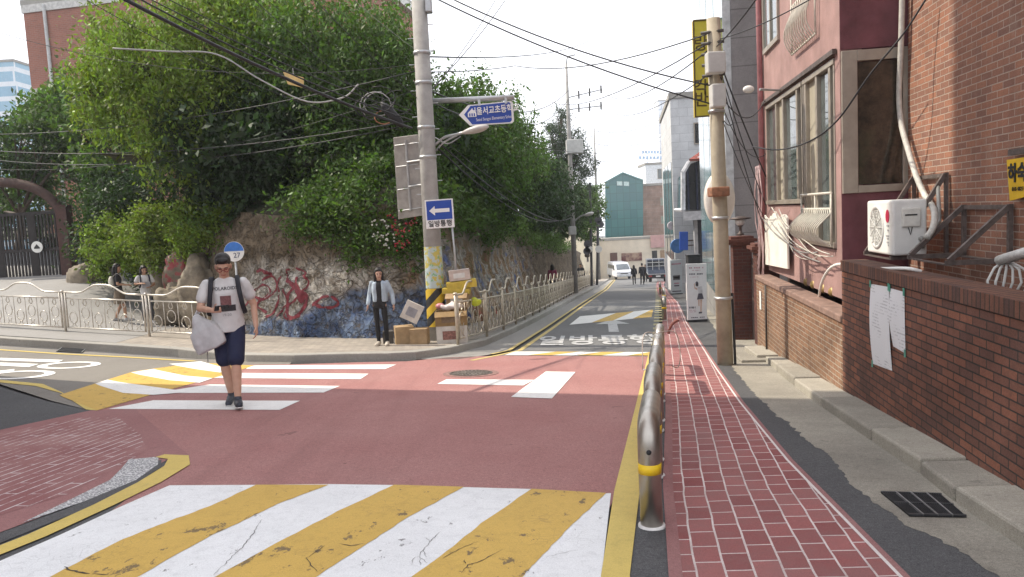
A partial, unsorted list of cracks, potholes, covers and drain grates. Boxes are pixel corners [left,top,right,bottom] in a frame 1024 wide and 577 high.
manhole cover [443,369,499,377]
crack [412,536,503,573]
drain grate [881,491,967,517]
